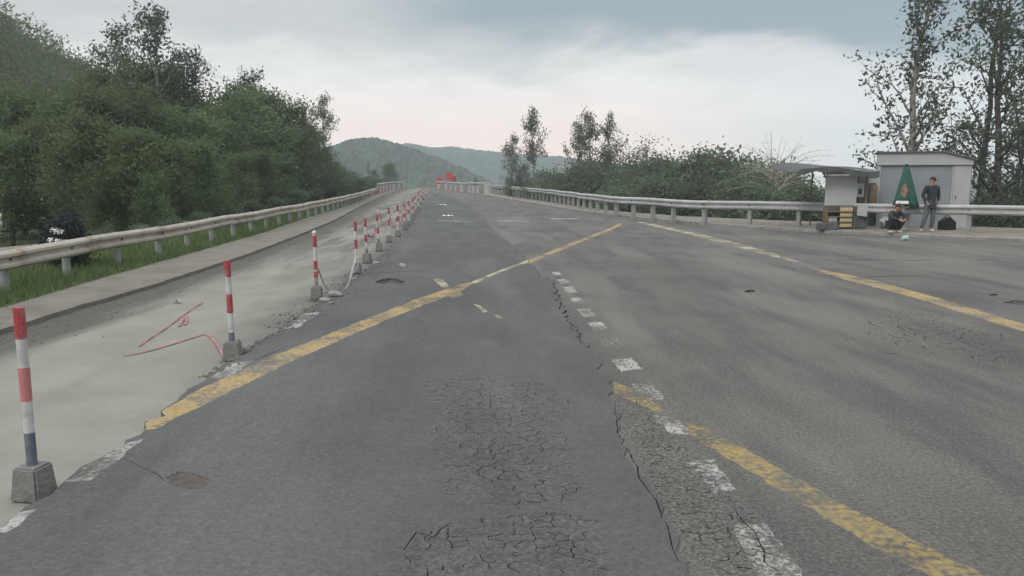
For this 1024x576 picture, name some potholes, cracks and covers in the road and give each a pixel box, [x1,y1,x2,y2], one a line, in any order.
crack [867,314,1012,361]
crack [531,265,590,348]
crack [404,378,612,576]
crack [614,398,796,574]
